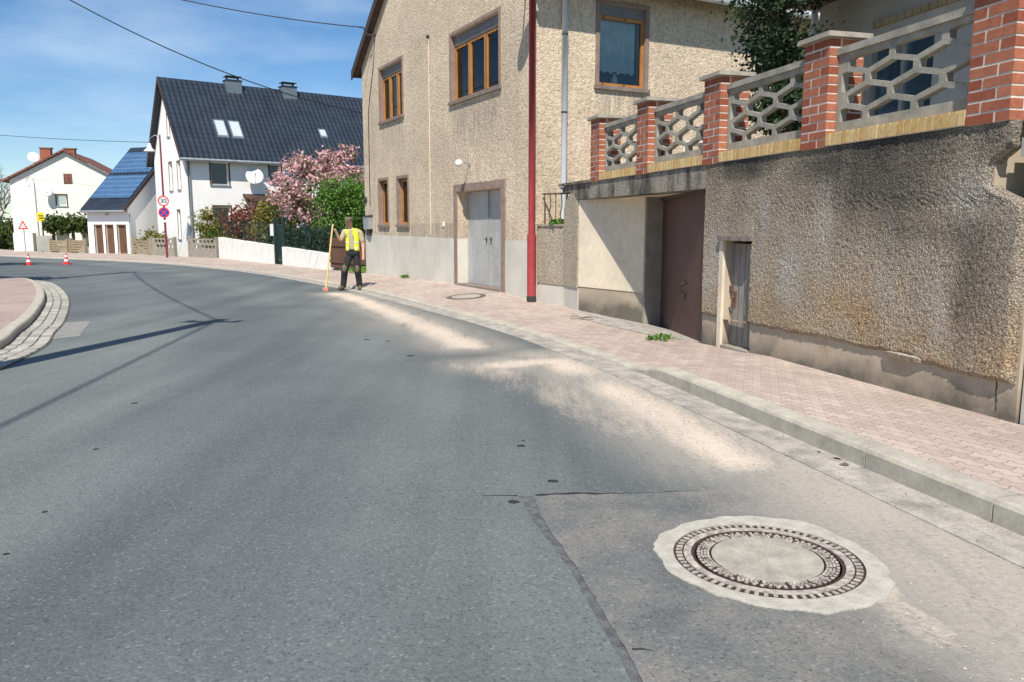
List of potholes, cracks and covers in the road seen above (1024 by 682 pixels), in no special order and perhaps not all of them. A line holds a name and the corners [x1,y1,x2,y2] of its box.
manhole cover [653,516,896,615]
